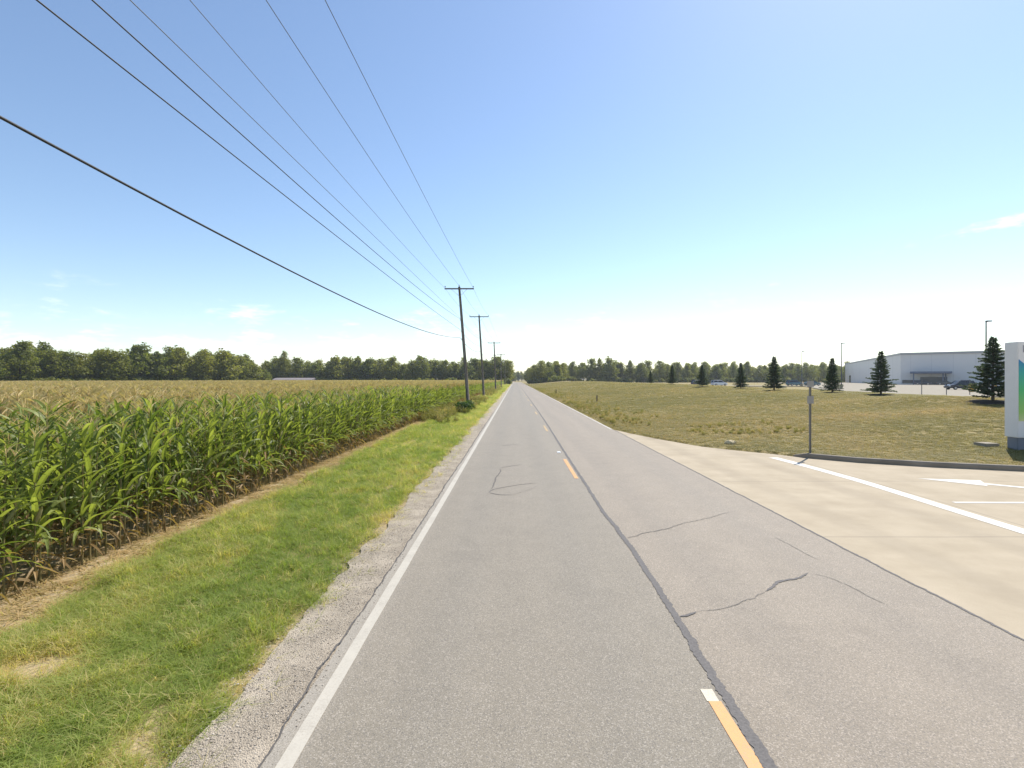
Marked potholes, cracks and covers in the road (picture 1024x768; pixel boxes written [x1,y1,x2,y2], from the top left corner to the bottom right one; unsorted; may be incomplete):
crack [489,464,534,495]
crack [681,539,885,616]
